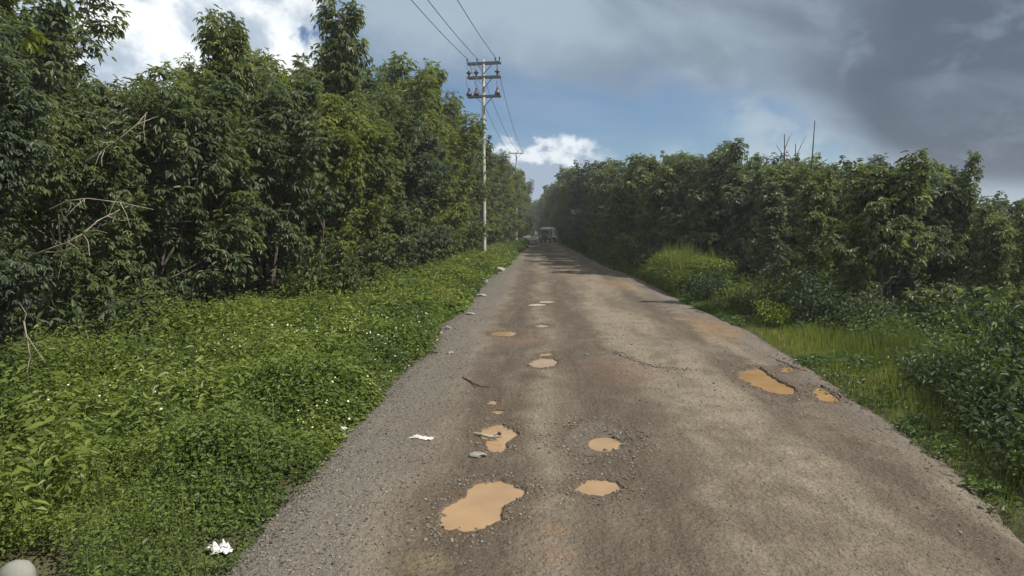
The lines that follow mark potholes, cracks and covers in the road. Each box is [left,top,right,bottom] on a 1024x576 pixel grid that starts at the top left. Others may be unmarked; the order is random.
pothole [812,386,841,402]
pothole [436,477,528,532]
pothole [736,367,799,395]
pothole [528,357,559,368]
pothole [572,478,624,496]
pothole [478,423,520,453]
